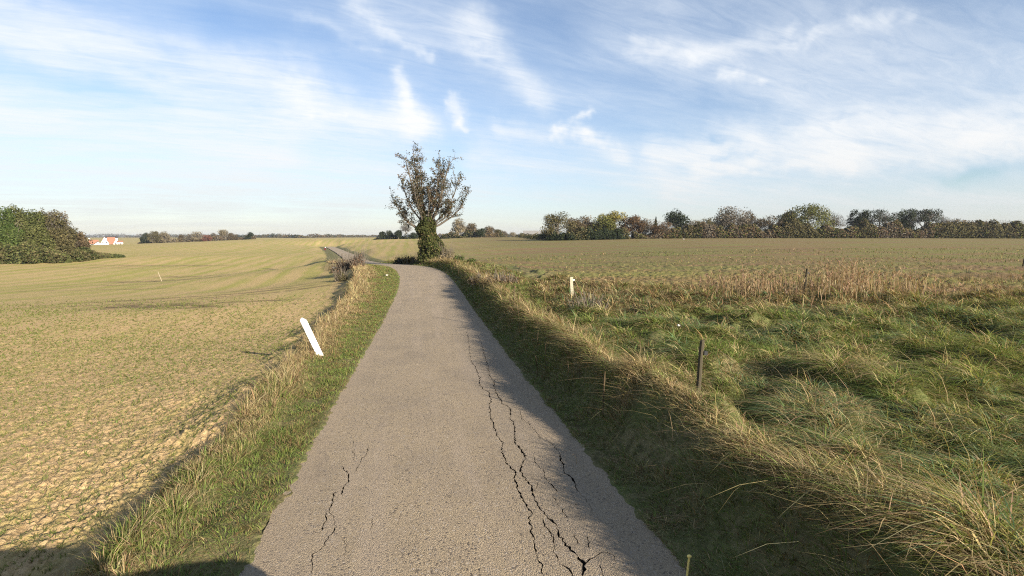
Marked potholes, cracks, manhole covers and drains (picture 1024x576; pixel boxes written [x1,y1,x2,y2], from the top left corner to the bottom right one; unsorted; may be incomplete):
crack [310,441,368,576]
